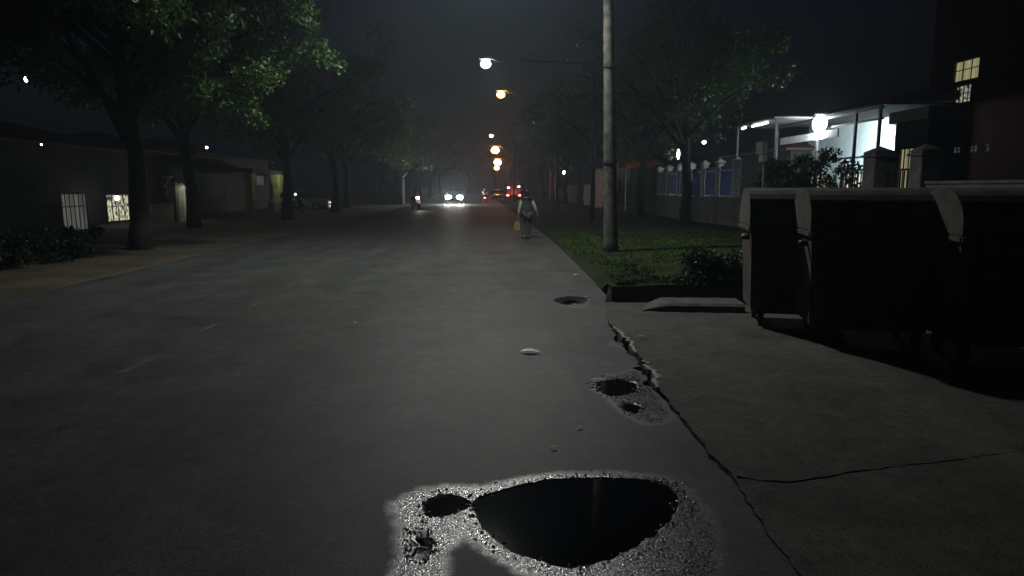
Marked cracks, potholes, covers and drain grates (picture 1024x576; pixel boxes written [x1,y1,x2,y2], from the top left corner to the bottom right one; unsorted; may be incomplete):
crack [608,321,664,395]
pothole [554,296,588,305]
pothole [621,402,643,414]
pothole [596,379,639,396]
pothole [471,477,680,569]
pothole [407,529,433,560]
pothole [421,493,471,517]
